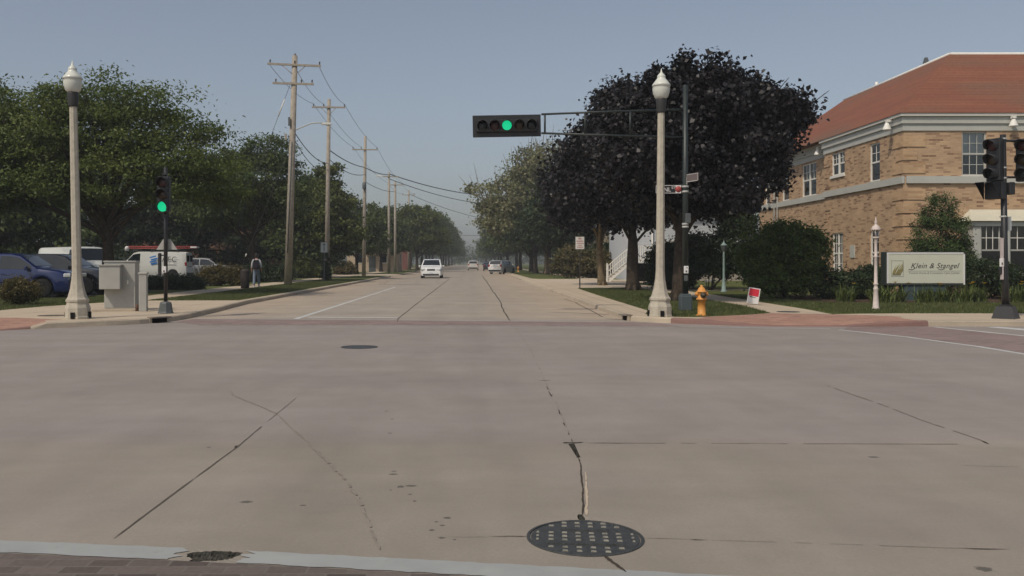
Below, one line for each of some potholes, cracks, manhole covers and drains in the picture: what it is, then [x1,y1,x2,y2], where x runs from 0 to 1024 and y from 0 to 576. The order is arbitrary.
crack [230,391,380,549]
pothole [179,547,249,563]
manhole cover [527,520,645,557]
